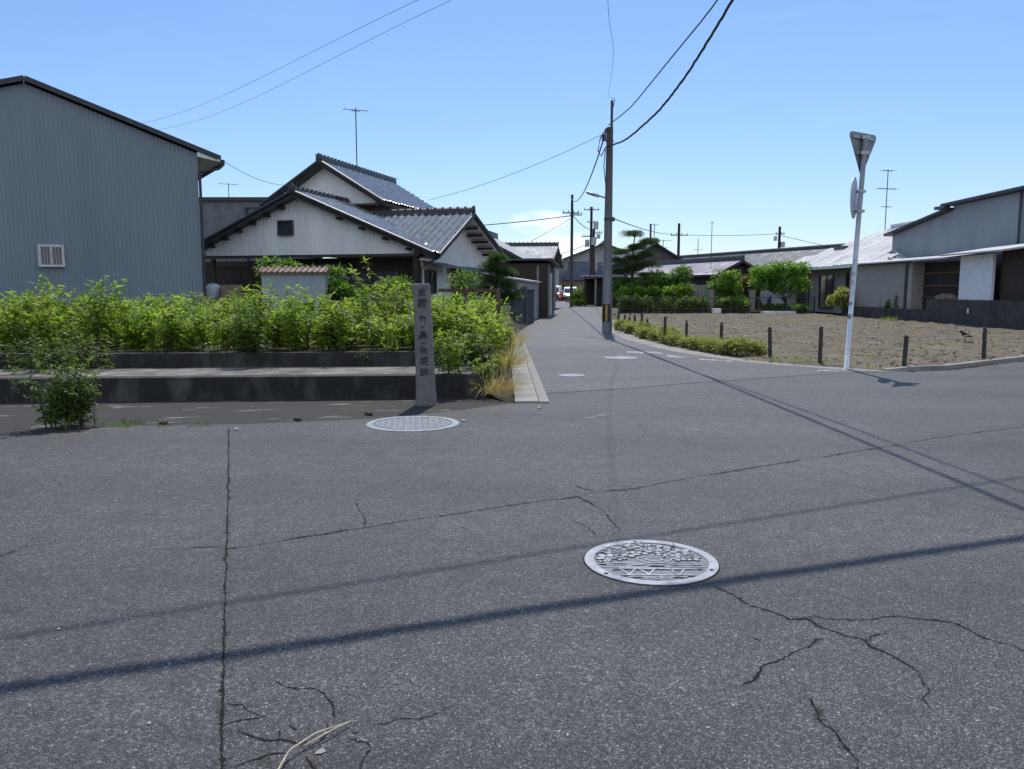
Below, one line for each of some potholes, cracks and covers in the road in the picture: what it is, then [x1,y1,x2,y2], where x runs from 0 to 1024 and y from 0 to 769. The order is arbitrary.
crack [810,697,860,769]
manhole cover [366,416,459,432]
manhole cover [583,540,720,587]
crack [231,427,1018,550]
crack [0,429,448,769]
crack [714,586,1024,708]
